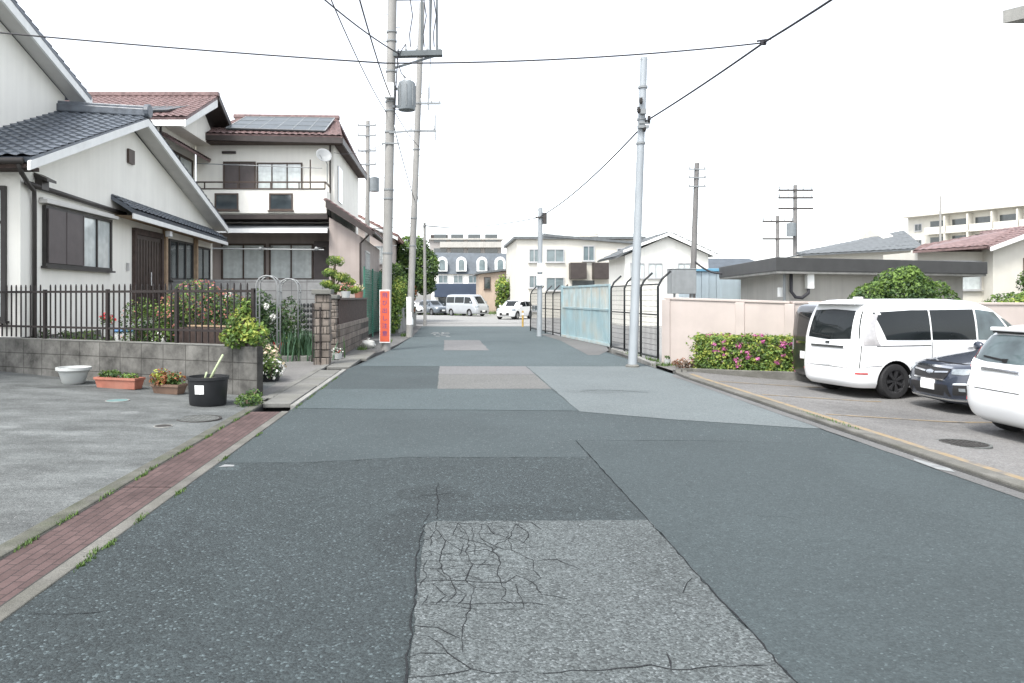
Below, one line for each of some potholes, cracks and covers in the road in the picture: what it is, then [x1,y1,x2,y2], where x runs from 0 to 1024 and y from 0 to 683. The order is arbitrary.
crack [404,486,579,683]
manhole cover [177,415,222,423]
crack [543,442,798,683]
manhole cover [935,438,993,449]
